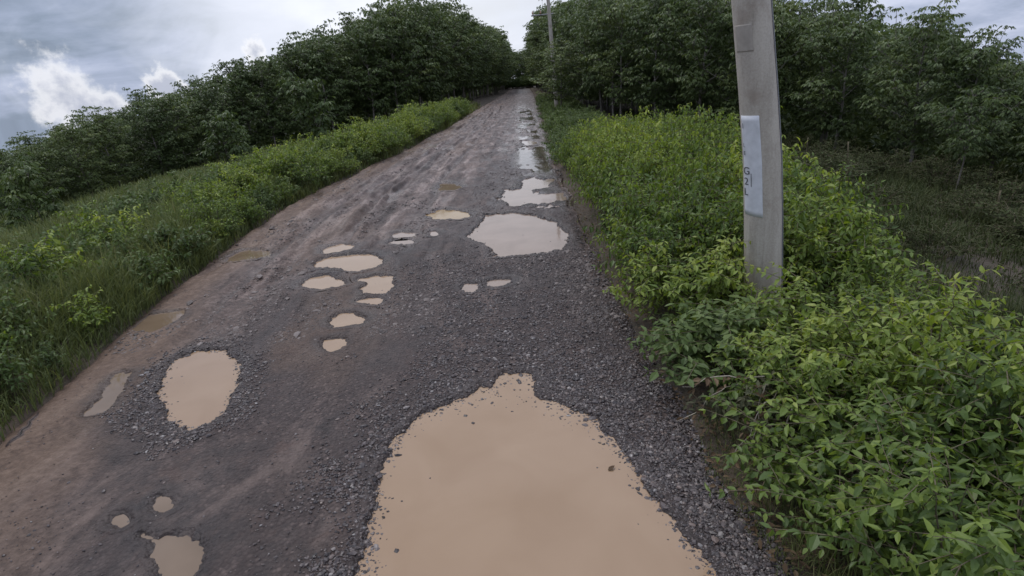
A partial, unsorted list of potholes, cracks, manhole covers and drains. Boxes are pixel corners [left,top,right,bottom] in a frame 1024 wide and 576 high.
pothole [382,228,425,247]
pothole [123,522,213,576]
pothole [453,279,484,294]
pothole [288,270,354,292]
pothole [347,294,392,307]
pothole [144,344,250,437]
pothole [458,209,578,259]
pothole [417,206,479,222]
pothole [303,248,392,273]
pothole [491,174,571,209]
